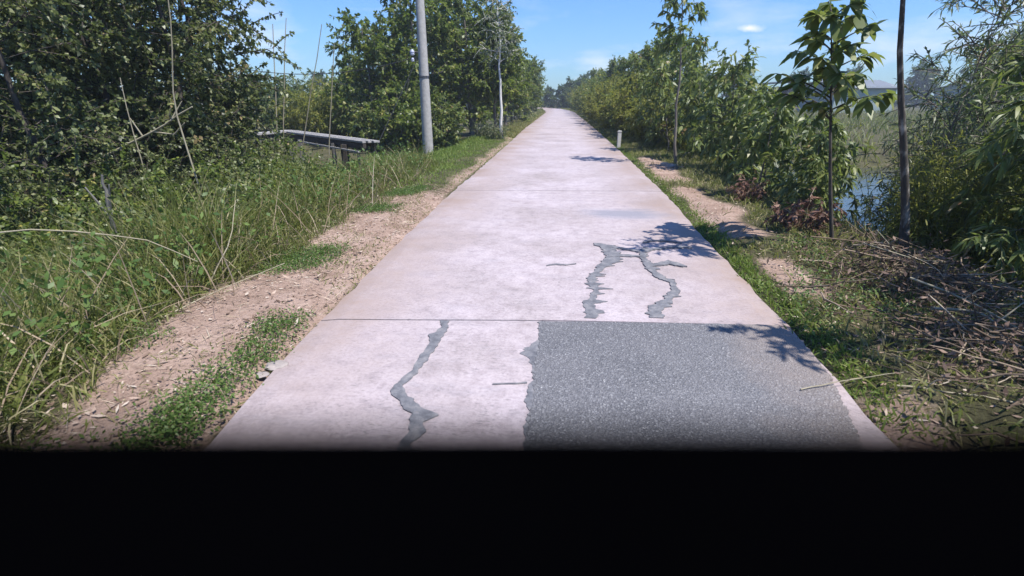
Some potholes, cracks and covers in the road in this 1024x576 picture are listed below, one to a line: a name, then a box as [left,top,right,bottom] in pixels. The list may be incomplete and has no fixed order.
crack [546,240,692,319]
crack [390,320,449,425]
